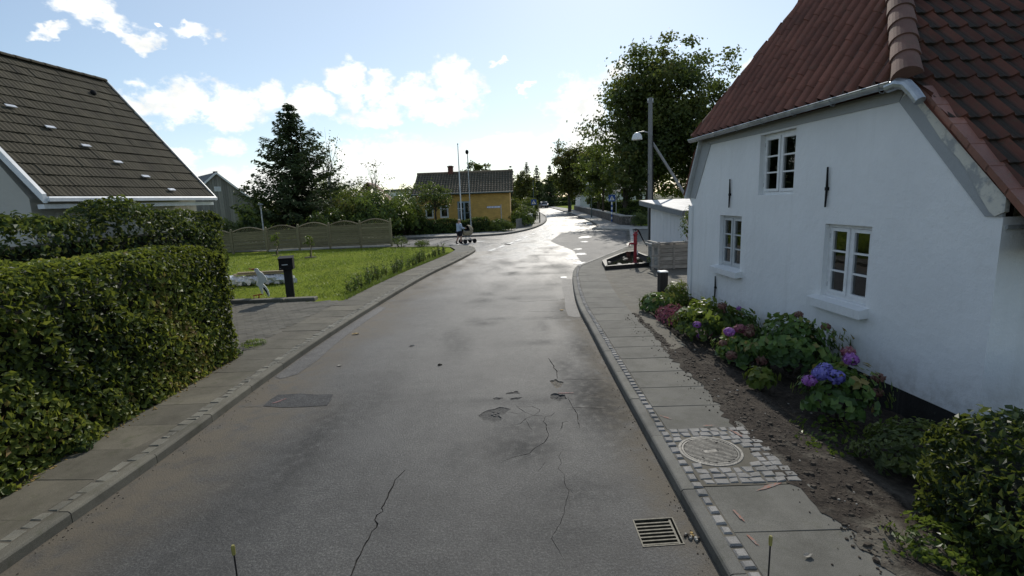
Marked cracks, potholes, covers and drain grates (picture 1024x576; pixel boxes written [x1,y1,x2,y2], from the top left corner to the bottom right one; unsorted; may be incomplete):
crack [501,399,605,554]
drain grate [633,517,685,547]
pothole [479,407,510,422]
manhole cover [678,436,744,467]
crack [351,470,405,576]
